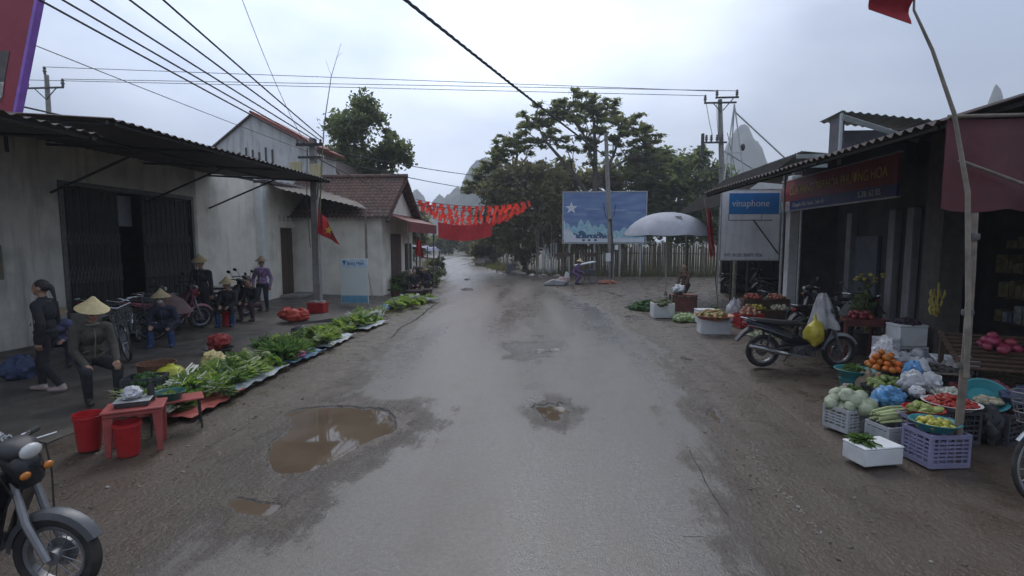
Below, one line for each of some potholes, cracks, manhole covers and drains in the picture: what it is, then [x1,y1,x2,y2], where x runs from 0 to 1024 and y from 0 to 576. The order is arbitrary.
pothole [502,341,563,360]
crack [689,449,730,517]
pothole [531,401,575,422]
crack [390,301,441,339]
pothole [228,496,283,515]
pothole [266,405,397,474]
